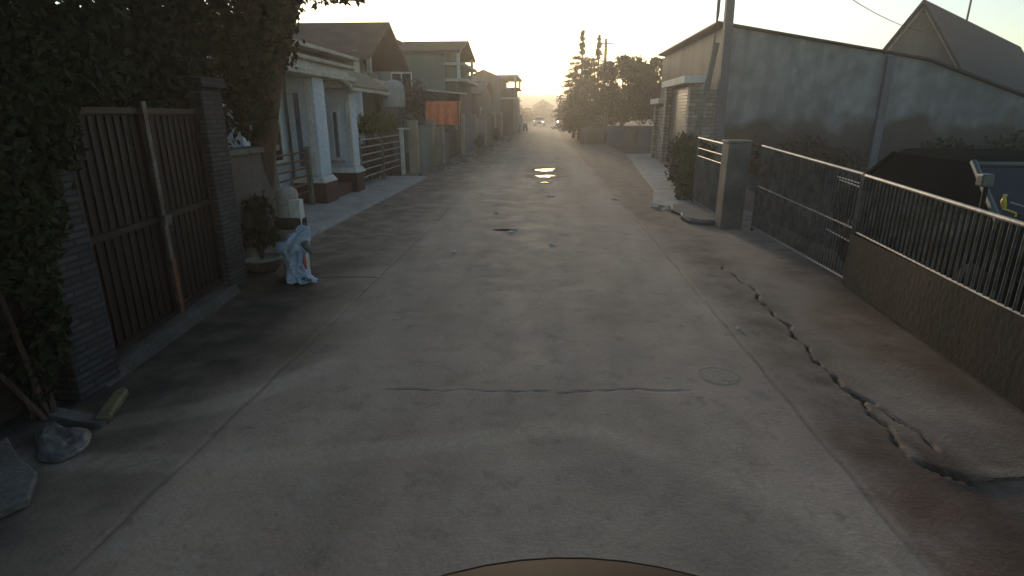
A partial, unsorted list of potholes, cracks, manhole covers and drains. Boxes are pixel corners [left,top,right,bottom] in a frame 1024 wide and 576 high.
crack [752,289,1024,483]
manhole cover [697,367,741,386]
